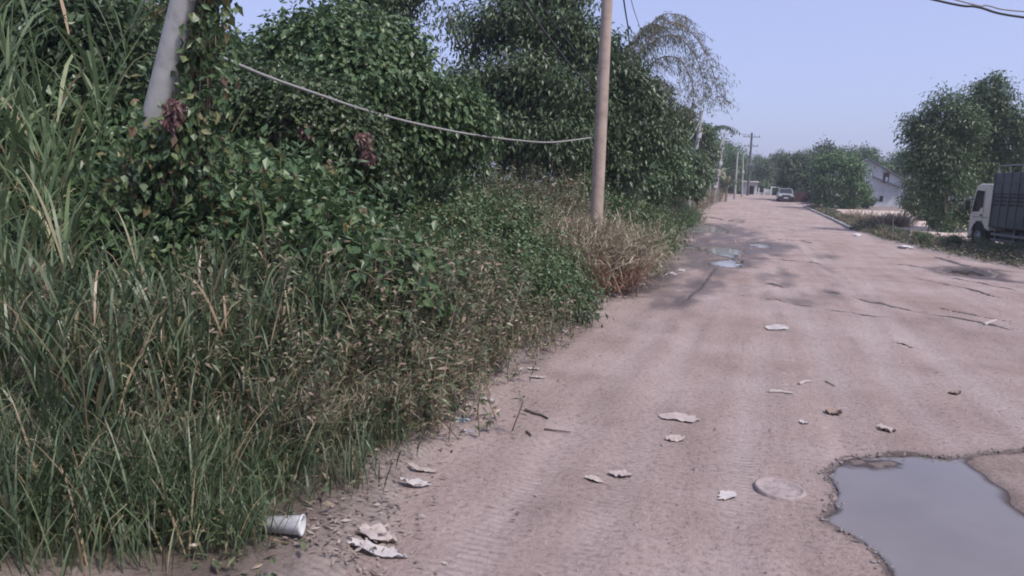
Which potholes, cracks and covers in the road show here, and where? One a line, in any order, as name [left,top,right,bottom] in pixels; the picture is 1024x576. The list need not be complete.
crack [740,257,1016,330]
pothole [702,247,745,260]
crack [688,269,715,299]
pothole [707,258,744,268]
manhole cover [754,477,807,501]
pothole [748,241,772,249]
pothole [935,266,1000,278]
pothole [817,447,1024,576]
